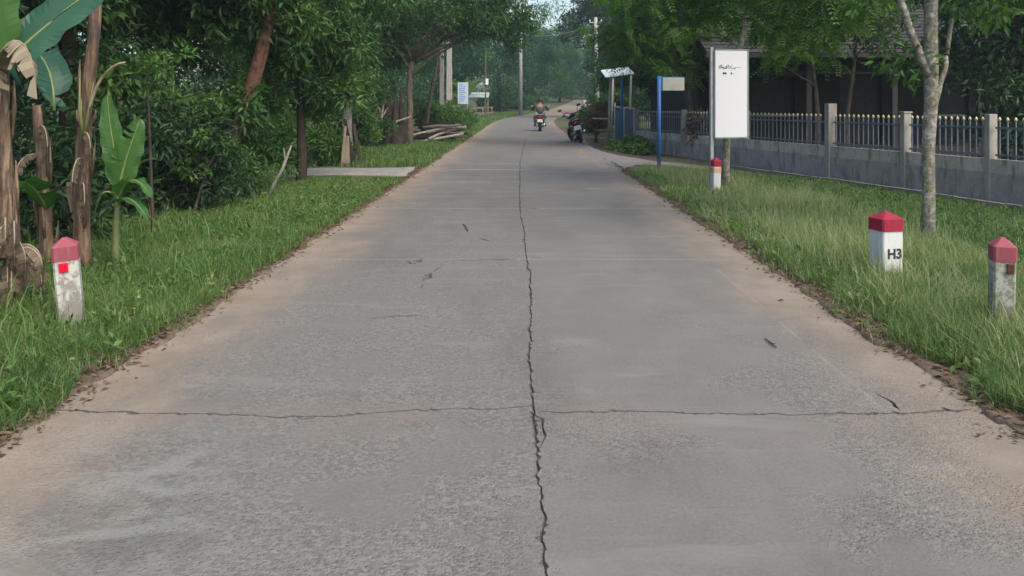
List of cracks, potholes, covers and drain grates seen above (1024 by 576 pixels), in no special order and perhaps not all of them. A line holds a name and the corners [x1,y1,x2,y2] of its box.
crack [58,138,966,576]
